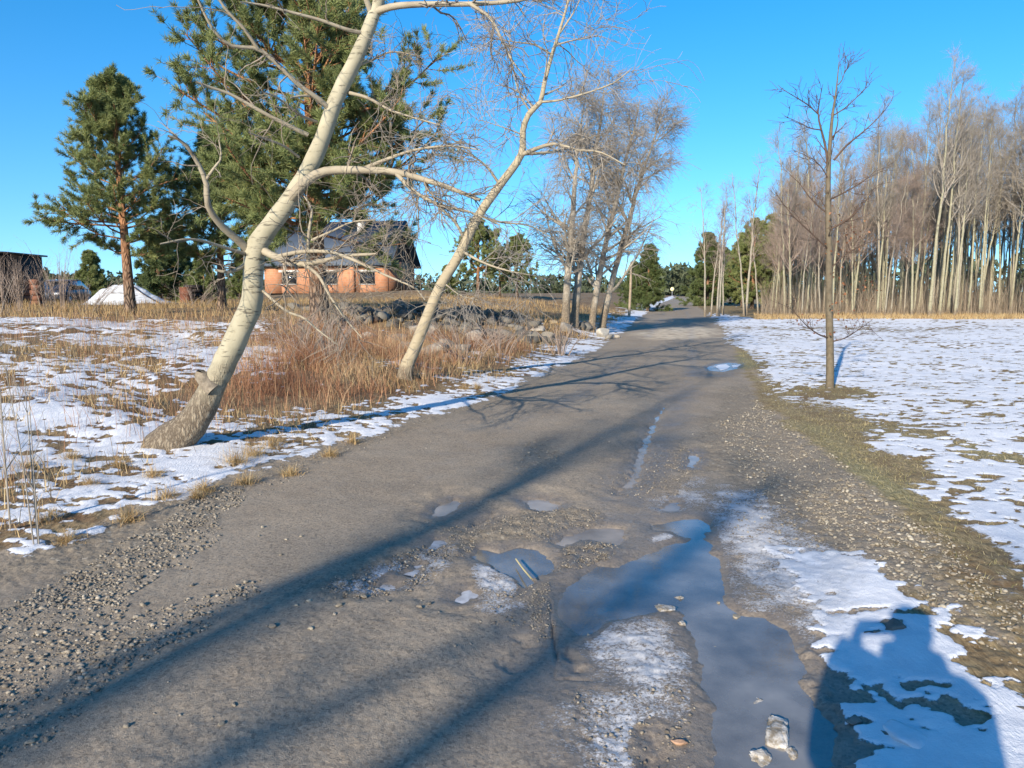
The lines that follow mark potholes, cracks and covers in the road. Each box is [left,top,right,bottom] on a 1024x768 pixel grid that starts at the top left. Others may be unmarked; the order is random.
pothole [559,648,591,676]
